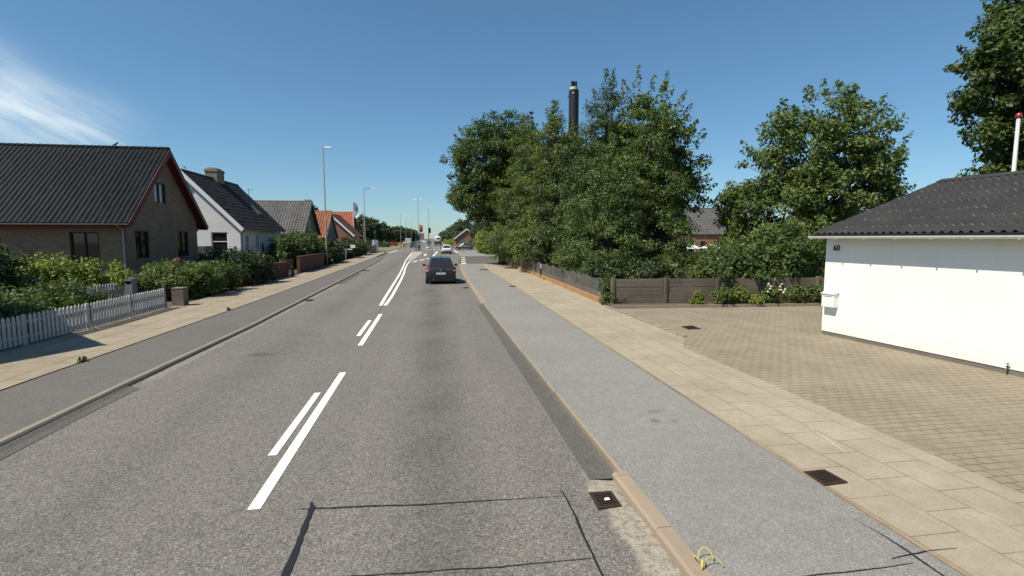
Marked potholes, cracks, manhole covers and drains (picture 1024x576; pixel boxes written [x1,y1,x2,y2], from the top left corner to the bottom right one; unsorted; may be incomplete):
drain grate [589,491,622,510]
drain grate [804,469,848,487]
